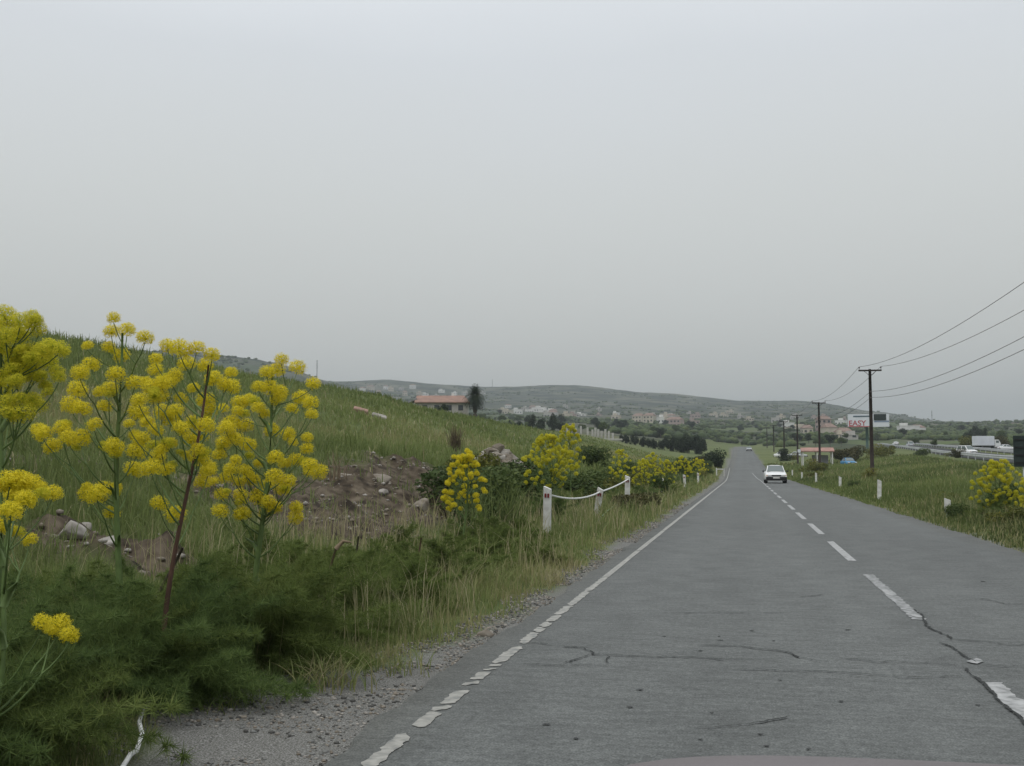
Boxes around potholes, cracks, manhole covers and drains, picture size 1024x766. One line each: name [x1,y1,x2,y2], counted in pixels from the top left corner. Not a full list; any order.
crack [698,716,787,727]
crack [524,608,1024,724]
